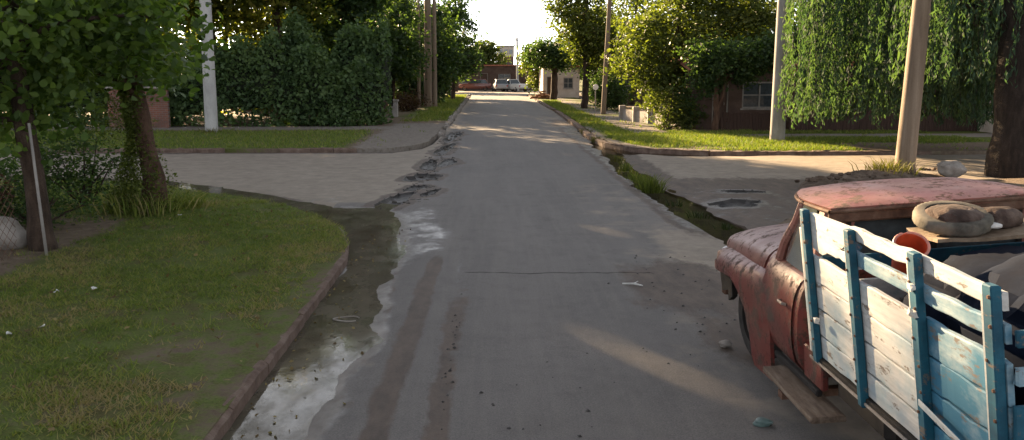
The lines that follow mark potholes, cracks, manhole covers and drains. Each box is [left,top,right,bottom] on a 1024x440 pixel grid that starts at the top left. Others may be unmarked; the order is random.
pothole [419,159,438,171]
pothole [707,198,763,207]
pothole [374,191,416,211]
pothole [434,158,457,167]
pothole [403,173,443,182]
